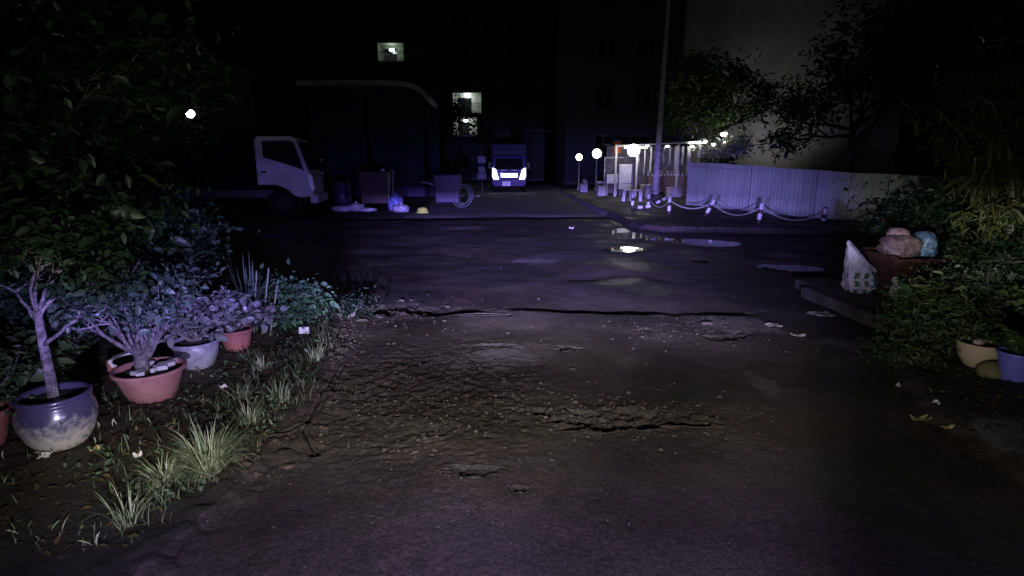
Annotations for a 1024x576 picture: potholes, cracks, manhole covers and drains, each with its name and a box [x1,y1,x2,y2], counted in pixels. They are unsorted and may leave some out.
pothole [435,463,508,479]
pothole [551,344,590,352]
pothole [532,403,730,434]
pothole [502,484,533,494]
crack [423,306,764,316]
